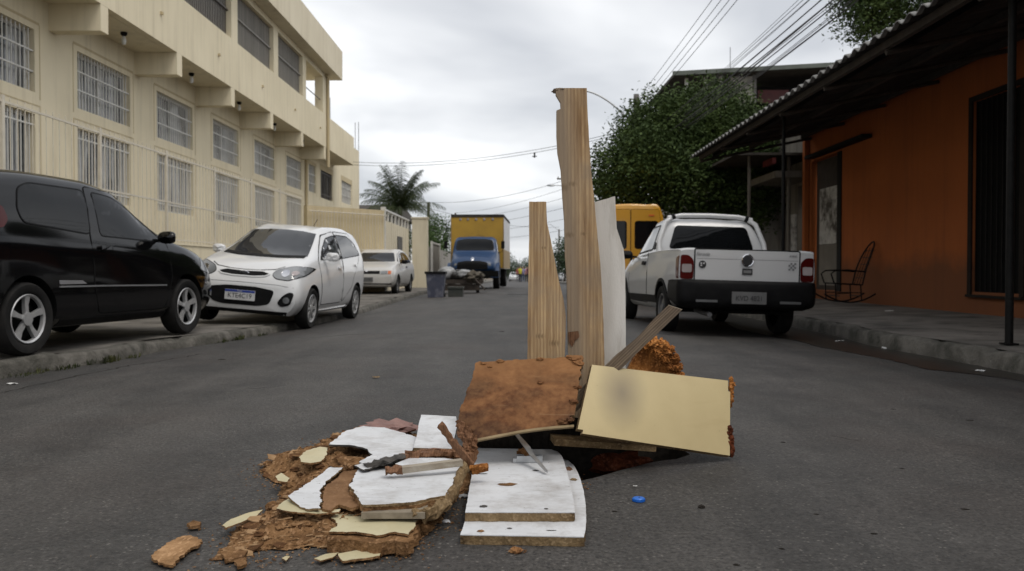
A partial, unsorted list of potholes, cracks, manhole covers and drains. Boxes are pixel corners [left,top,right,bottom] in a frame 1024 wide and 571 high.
pothole [638,447,690,462]
